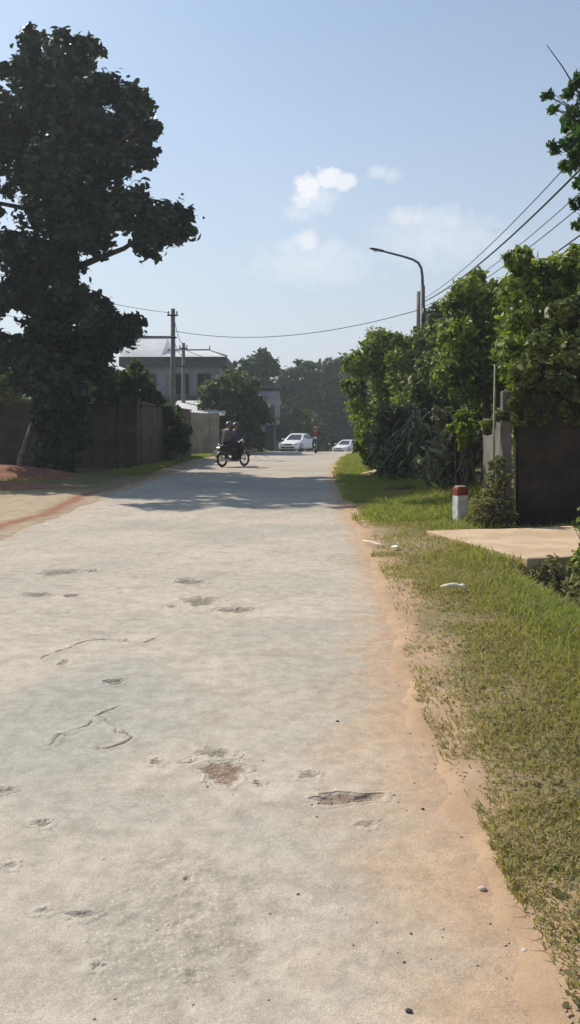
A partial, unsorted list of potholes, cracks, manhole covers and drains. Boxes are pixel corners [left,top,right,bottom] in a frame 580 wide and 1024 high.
pothole [293,768,326,782]
pothole [348,818,382,832]
pothole [177,595,221,609]
crack [33,635,166,660]
pothole [58,907,108,925]
crack [38,704,141,753]
pothole [301,788,393,809]
pothole [171,576,212,586]
pothole [208,606,266,615]
pothole [98,677,129,688]
pothole [33,568,92,578]
